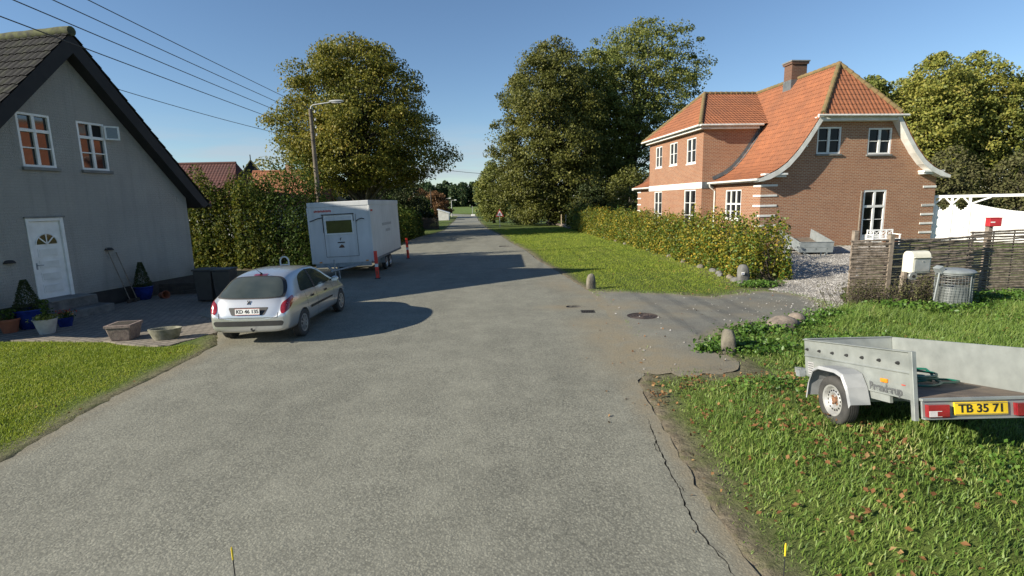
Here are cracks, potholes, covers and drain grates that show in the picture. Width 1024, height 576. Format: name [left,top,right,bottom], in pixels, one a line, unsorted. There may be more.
crack [649,421,732,573]
